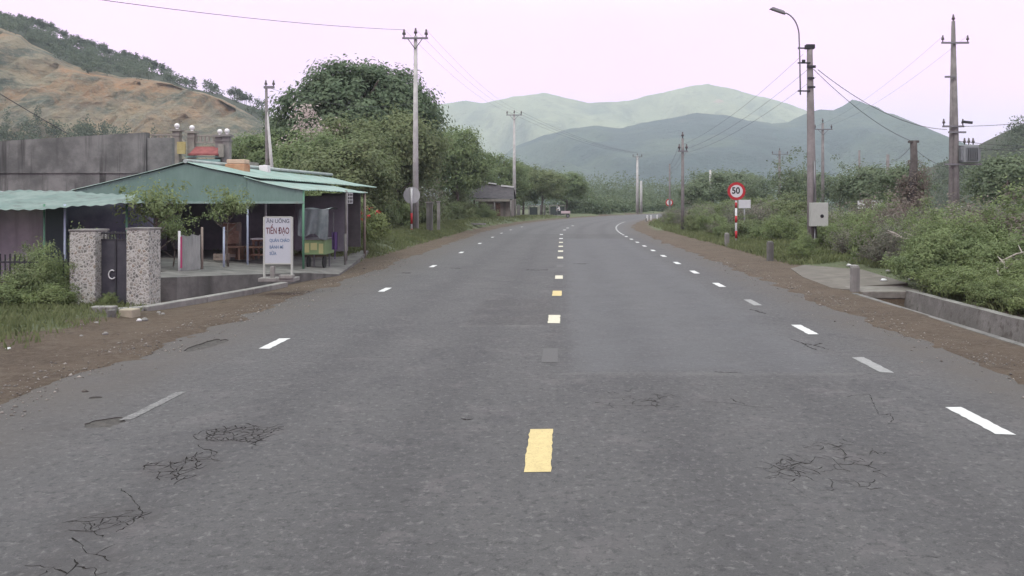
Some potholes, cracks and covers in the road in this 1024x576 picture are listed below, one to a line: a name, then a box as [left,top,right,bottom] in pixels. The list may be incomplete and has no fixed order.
crack [595,388,680,407]
crack [143,423,284,484]
crack [25,488,152,576]
pothole [184,339,228,352]
crack [756,434,893,494]
pothole [85,417,126,428]
